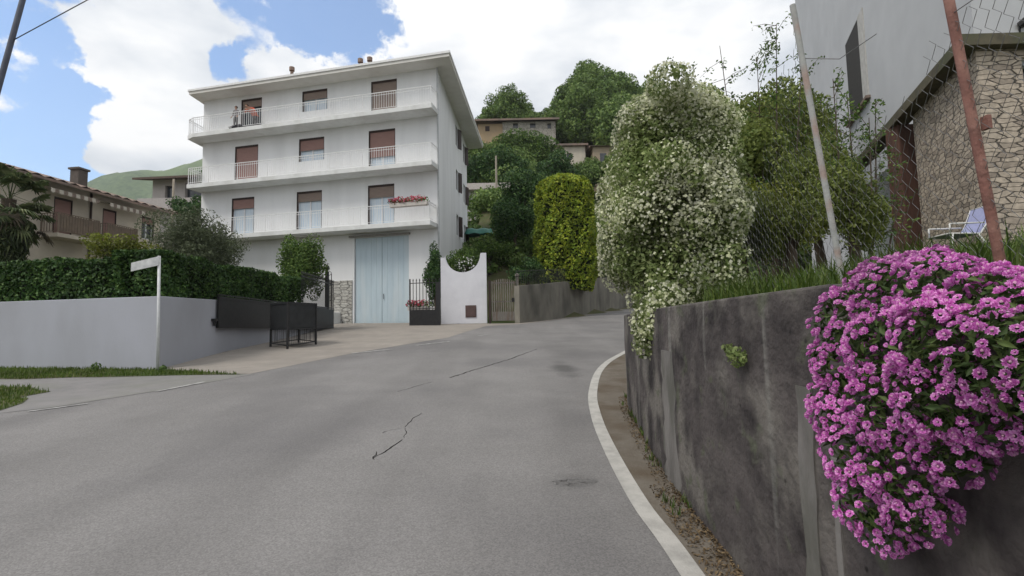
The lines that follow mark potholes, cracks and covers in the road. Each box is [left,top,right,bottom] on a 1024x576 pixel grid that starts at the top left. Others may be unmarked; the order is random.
crack [372,414,421,460]
